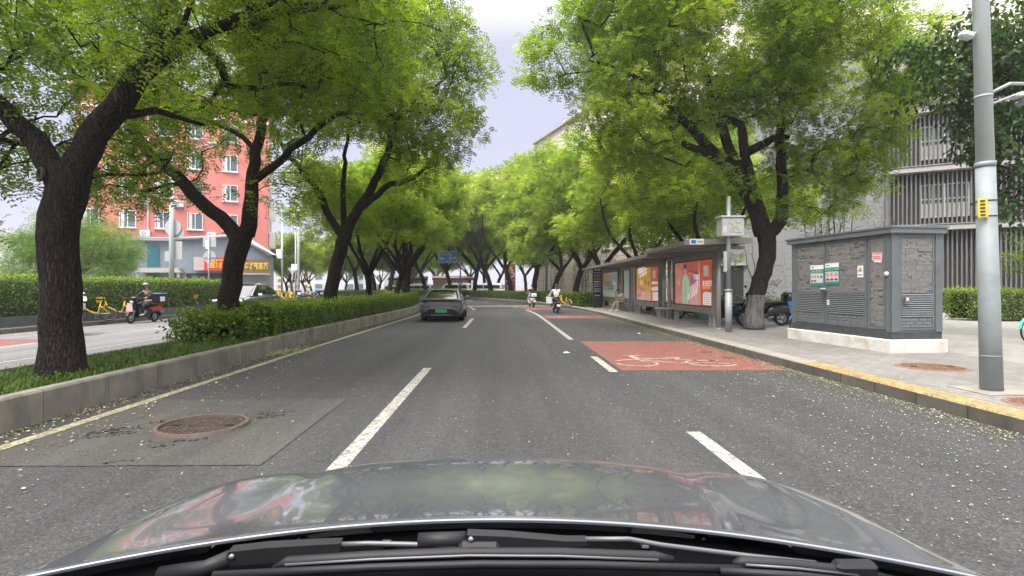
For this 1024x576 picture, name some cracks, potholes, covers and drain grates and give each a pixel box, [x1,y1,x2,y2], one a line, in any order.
manhole cover [1001,397,1024,407]
manhole cover [895,362,972,372]
manhole cover [151,413,250,439]
